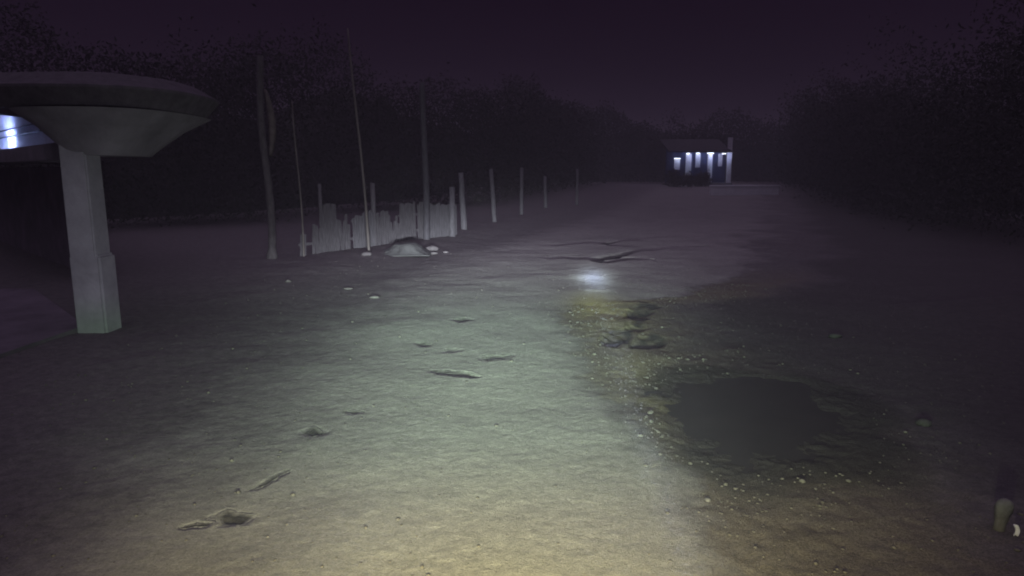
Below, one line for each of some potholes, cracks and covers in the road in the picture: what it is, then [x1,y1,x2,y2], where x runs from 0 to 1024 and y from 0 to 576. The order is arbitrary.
pothole [206,509,258,527]
pothole [597,301,681,350]
pothole [299,426,329,437]
pothole [635,372,895,486]
pothole [427,370,481,379]
crack [558,239,709,263]
pothole [478,353,514,361]
